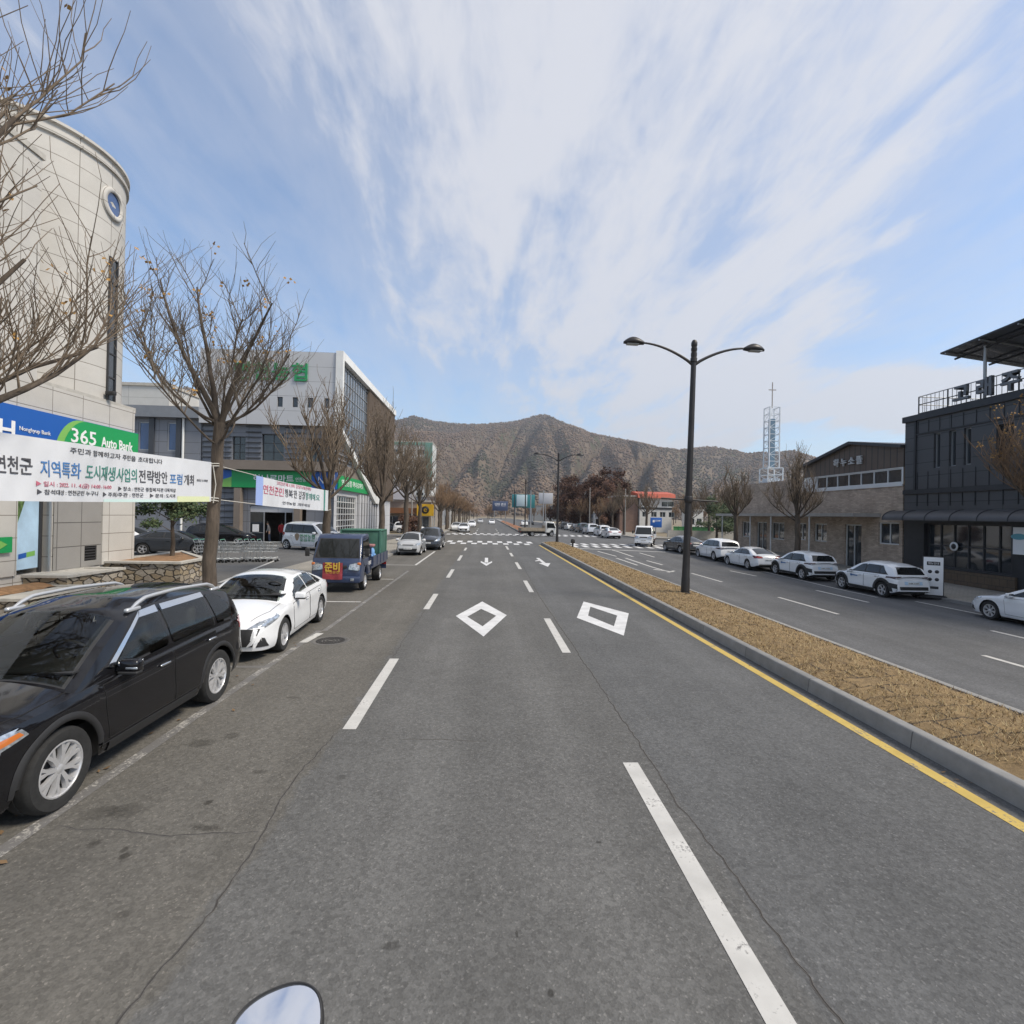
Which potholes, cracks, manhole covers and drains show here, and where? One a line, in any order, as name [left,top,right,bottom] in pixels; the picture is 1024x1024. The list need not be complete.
manhole cover [311,636,350,645]
crack [59,732,338,1024]
